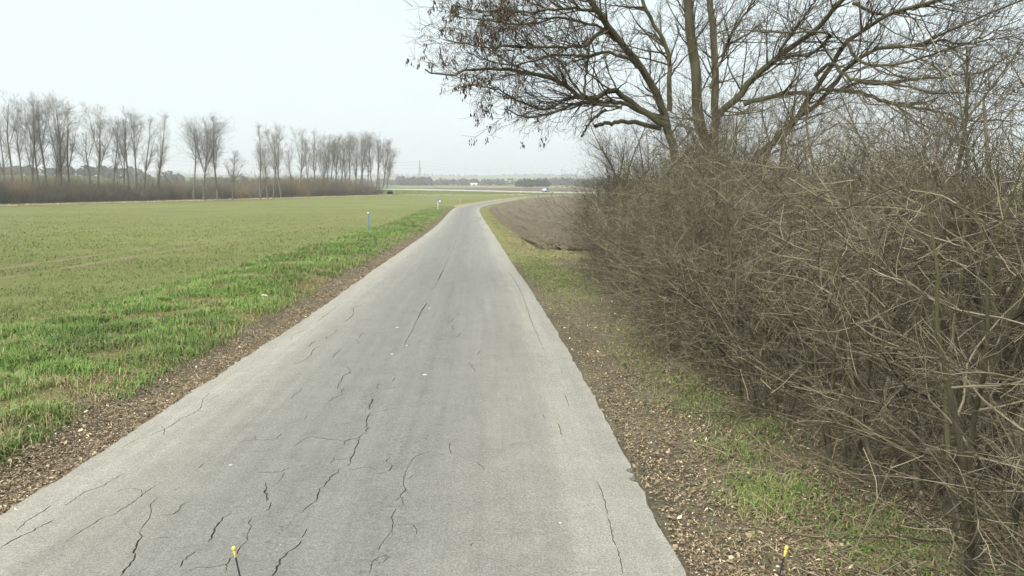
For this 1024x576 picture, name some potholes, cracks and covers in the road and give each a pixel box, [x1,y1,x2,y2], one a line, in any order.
crack [1,473,189,574]
crack [180,269,451,572]
